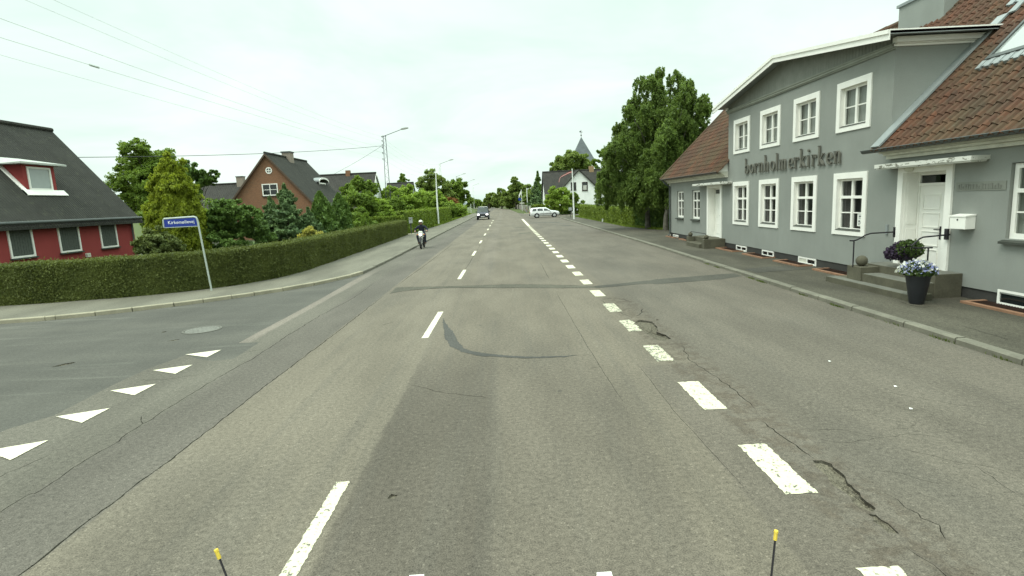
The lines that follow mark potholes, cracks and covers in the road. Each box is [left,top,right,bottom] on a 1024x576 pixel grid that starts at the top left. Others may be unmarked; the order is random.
crack [684,348,1021,497]
manhole cover [182,325,222,334]
crack [885,493,945,538]
